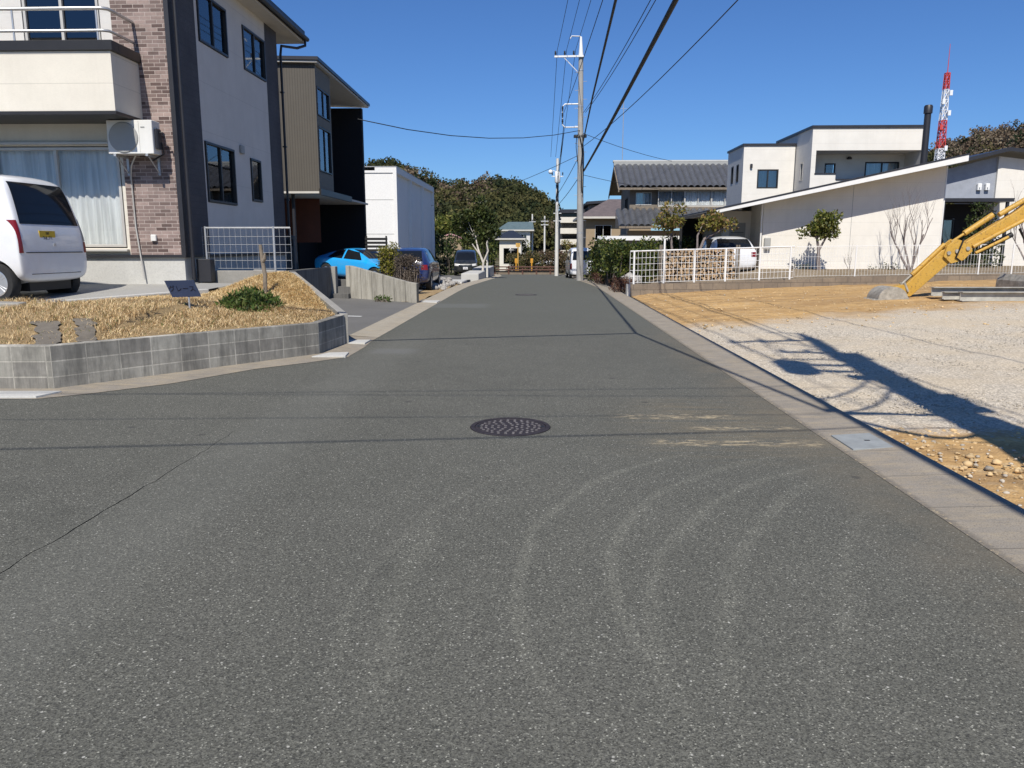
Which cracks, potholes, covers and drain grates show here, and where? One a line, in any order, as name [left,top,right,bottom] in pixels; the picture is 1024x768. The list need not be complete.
manhole cover [471,417,550,437]
crack [1,434,230,573]
